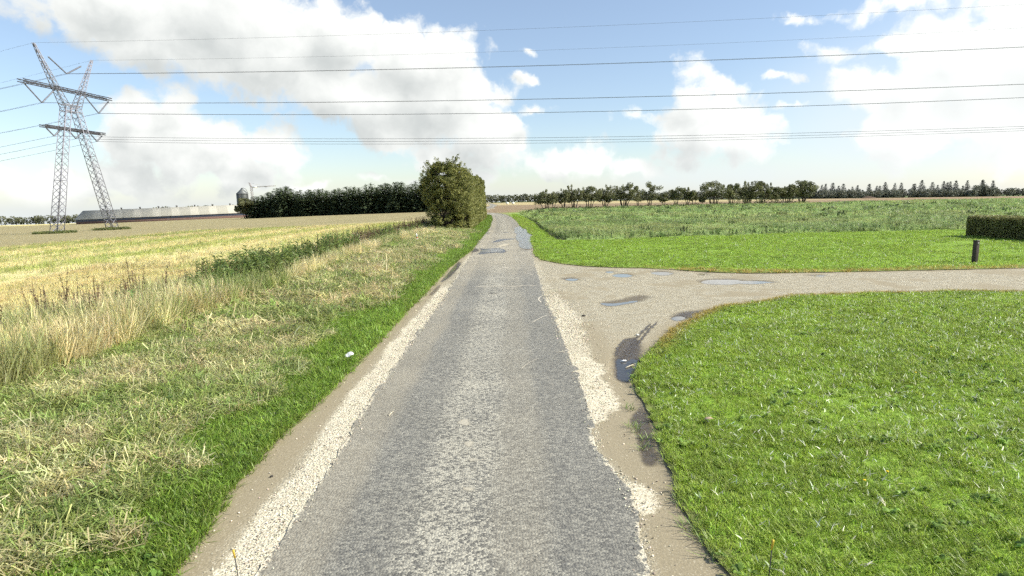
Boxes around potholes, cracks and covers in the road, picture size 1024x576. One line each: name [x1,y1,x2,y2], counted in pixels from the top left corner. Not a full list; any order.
pothole [514,226,532,250]
pothole [671,310,703,321]
pothole [615,338,641,383]
pothole [600,296,645,306]
